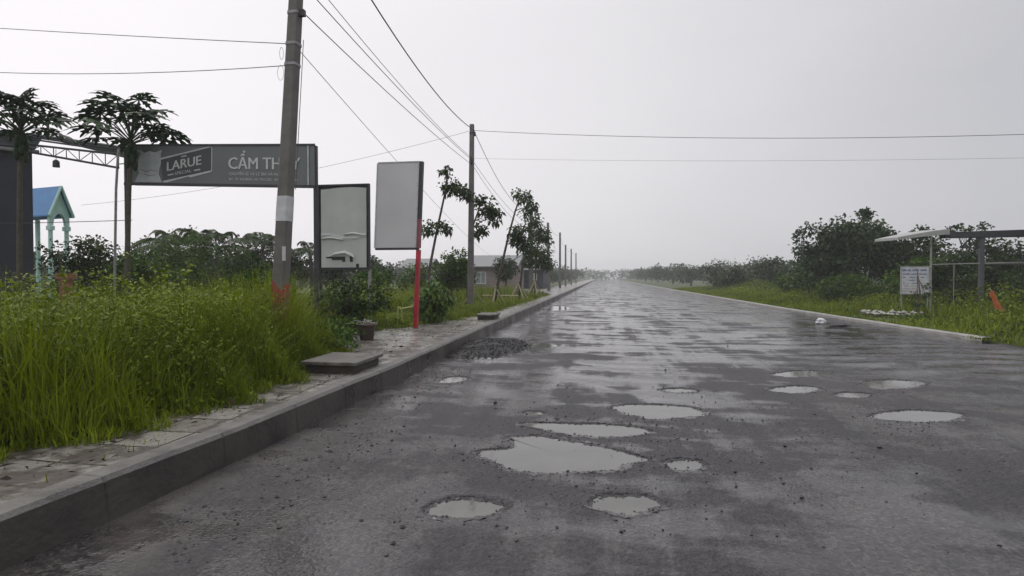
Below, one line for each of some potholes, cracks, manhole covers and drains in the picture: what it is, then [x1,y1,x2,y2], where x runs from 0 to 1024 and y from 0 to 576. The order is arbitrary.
pothole [812,389,877,400]
pothole [508,418,680,451]
pothole [518,409,571,417]
pothole [393,491,519,526]
pothole [764,384,827,394]
pothole [434,375,474,384]
pothole [767,369,835,378]
pothole [454,430,682,497]
pothole [860,405,971,425]
pothole [601,400,733,424]
pothole [831,377,932,393]
